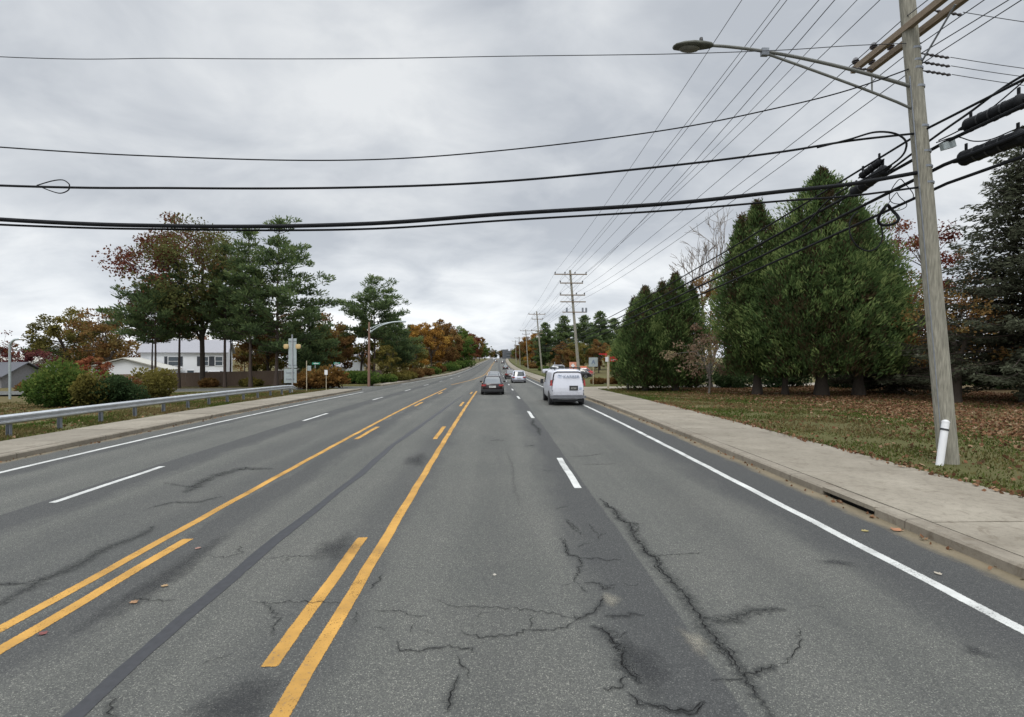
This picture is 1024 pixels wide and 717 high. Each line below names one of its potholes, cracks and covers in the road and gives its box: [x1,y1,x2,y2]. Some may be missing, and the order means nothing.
crack [380,498,801,716]
crack [0,530,149,605]
drain grate [823,487,889,514]
